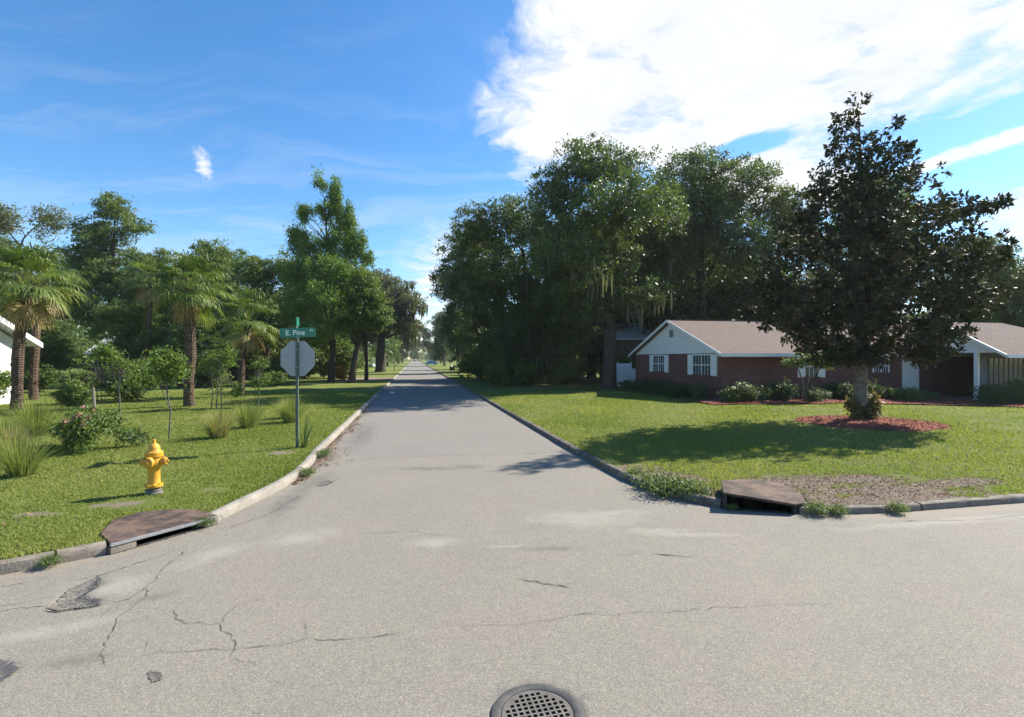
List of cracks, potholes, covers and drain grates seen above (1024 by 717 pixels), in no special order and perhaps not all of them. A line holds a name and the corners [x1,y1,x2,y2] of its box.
pothole [0,659,20,681]
manhole cover [491,684,584,717]
pothole [147,670,162,682]
drain grate [720,479,806,515]
crack [478,603,830,625]
crack [0,547,189,666]
pothole [47,575,102,611]
drain grate [100,509,218,555]
crack [144,600,402,664]
